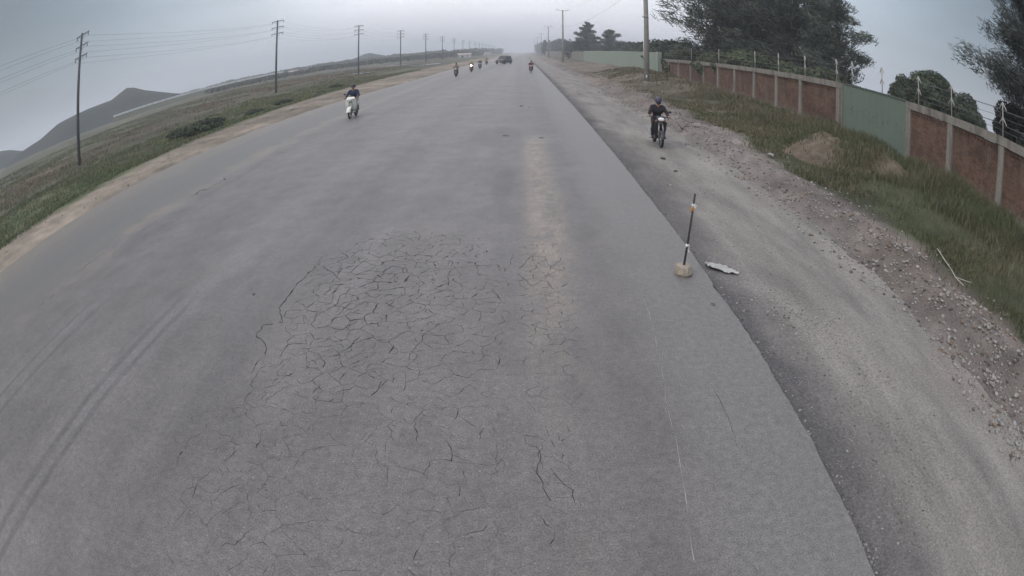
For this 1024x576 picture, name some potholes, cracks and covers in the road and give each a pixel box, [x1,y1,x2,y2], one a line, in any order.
crack [166,231,509,576]
crack [510,244,582,550]
